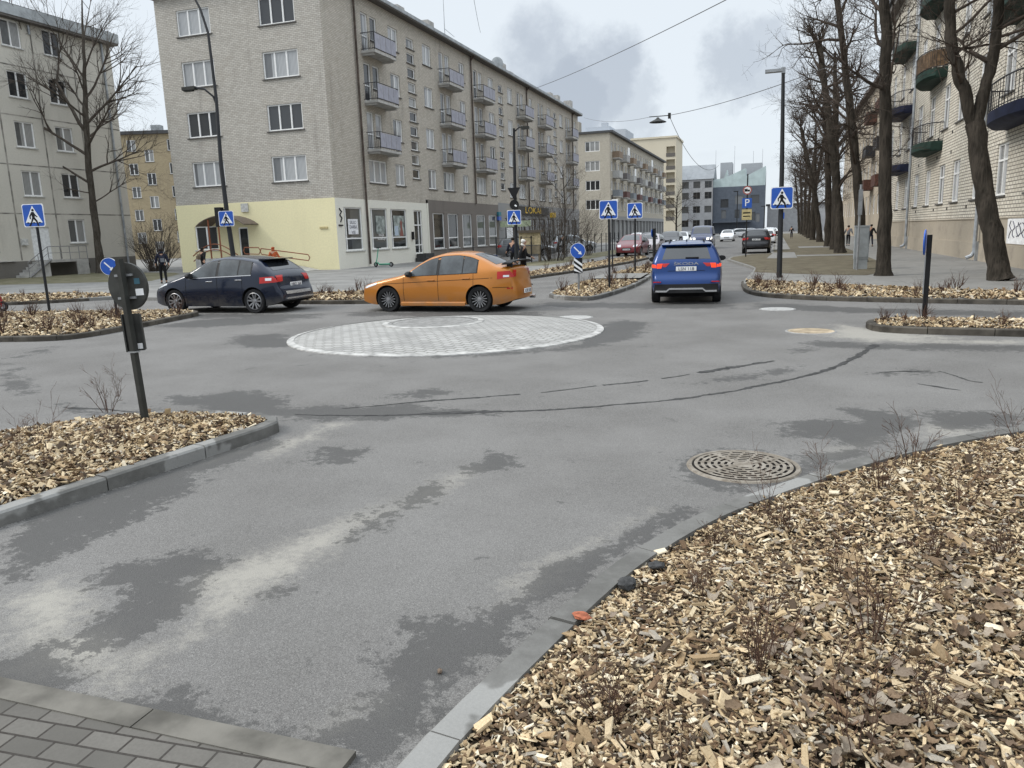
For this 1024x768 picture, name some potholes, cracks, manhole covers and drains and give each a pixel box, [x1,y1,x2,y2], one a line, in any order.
manhole cover [686,450,802,484]
